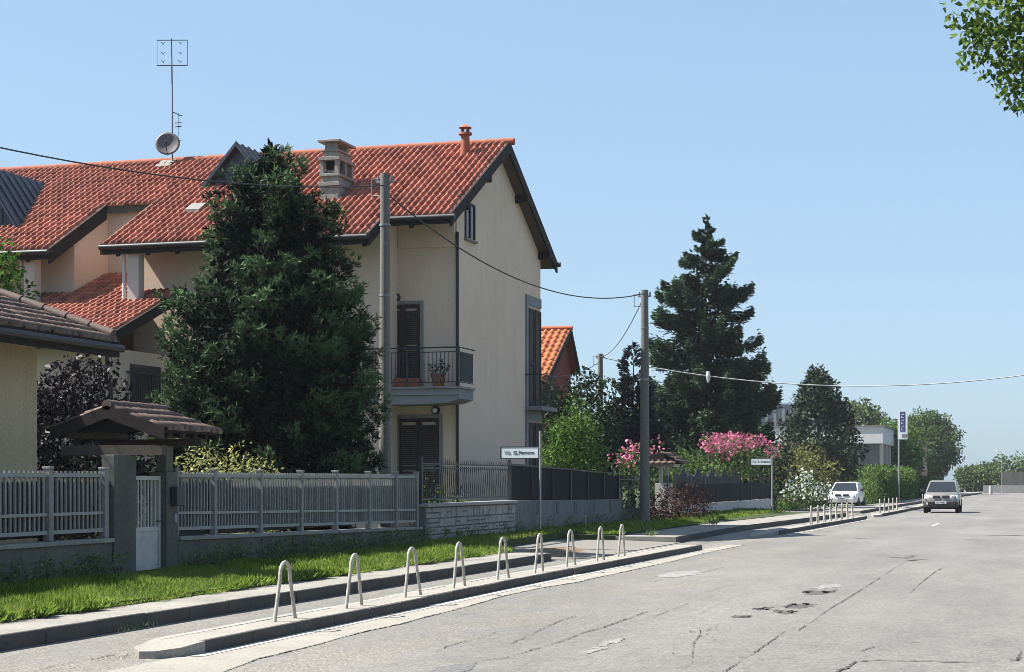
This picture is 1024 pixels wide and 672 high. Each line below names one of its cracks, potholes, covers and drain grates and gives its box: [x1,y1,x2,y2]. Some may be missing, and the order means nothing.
crack [227,546,943,672]
